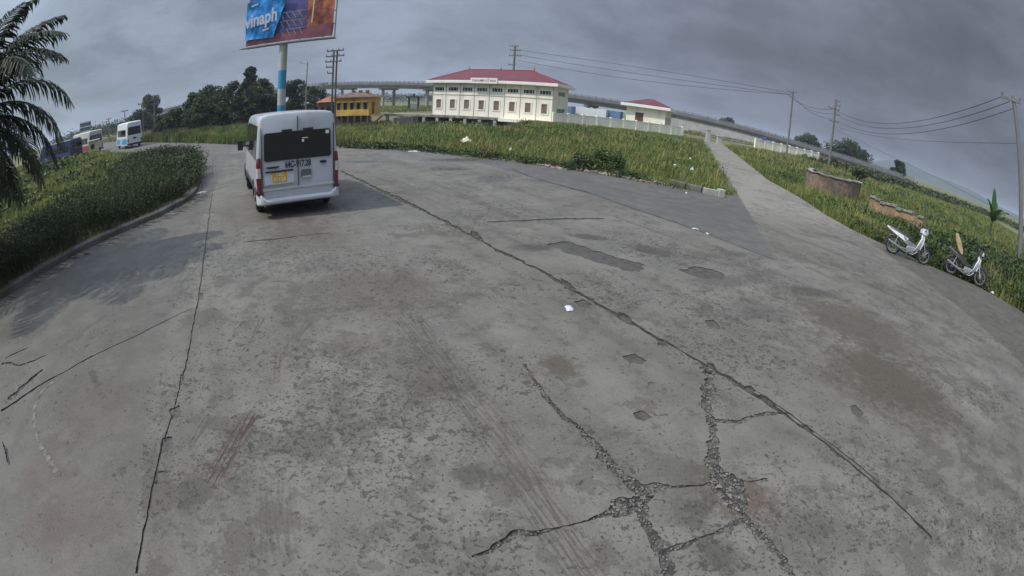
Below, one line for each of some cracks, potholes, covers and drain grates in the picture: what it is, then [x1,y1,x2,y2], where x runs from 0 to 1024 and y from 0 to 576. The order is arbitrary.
crack [1,347,46,401]
pothole [633,411,651,421]
pothole [679,266,724,279]
pothole [623,353,647,364]
pothole [547,241,644,272]
